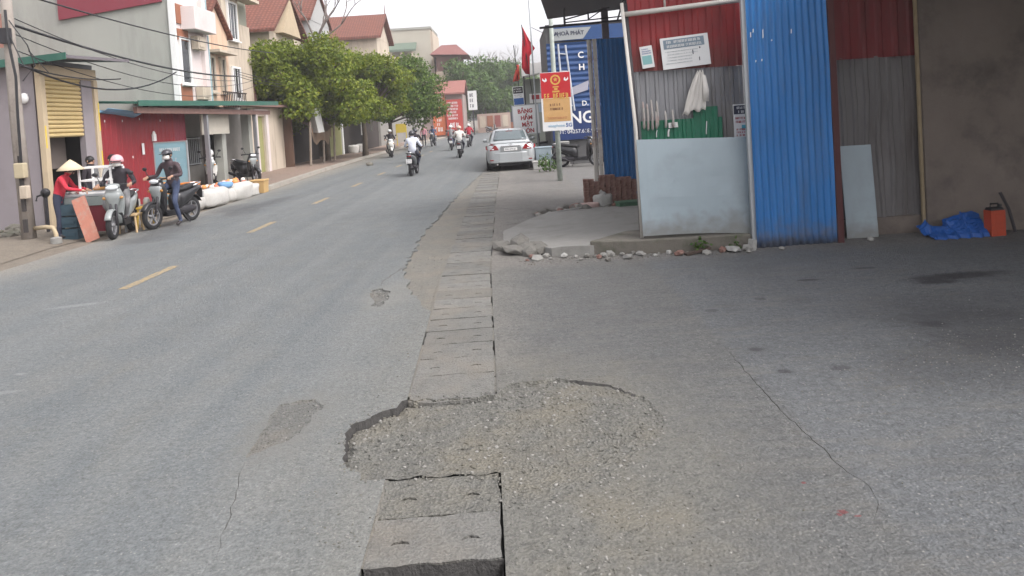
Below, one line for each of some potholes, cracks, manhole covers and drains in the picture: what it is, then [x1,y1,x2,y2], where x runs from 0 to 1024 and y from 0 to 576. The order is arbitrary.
pothole [342,378,665,509]
pothole [370,288,391,307]
crack [217,463,245,554]
